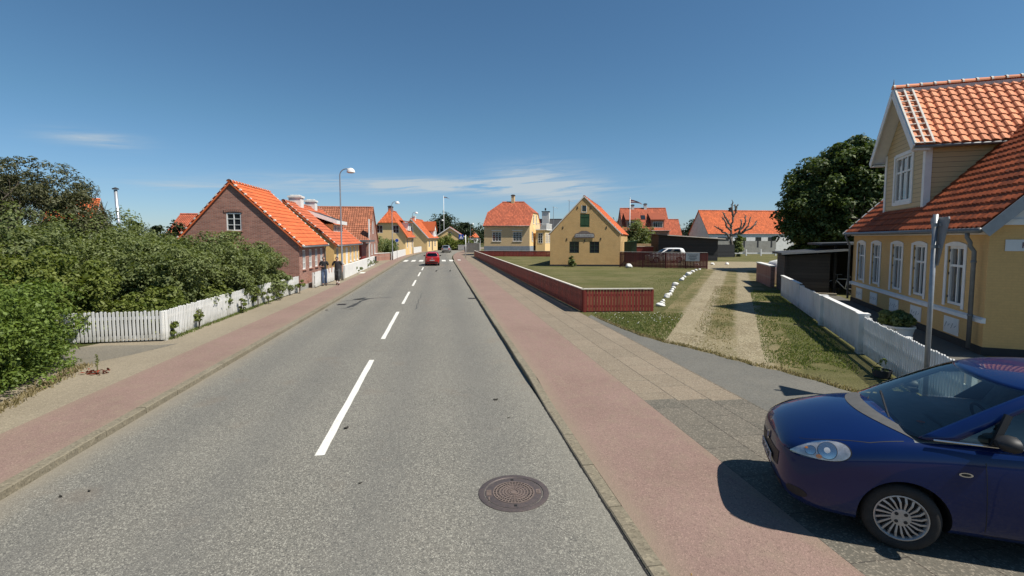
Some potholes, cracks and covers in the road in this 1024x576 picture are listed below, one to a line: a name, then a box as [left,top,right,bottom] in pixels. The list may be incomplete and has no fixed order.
manhole cover [478,475,549,512]
